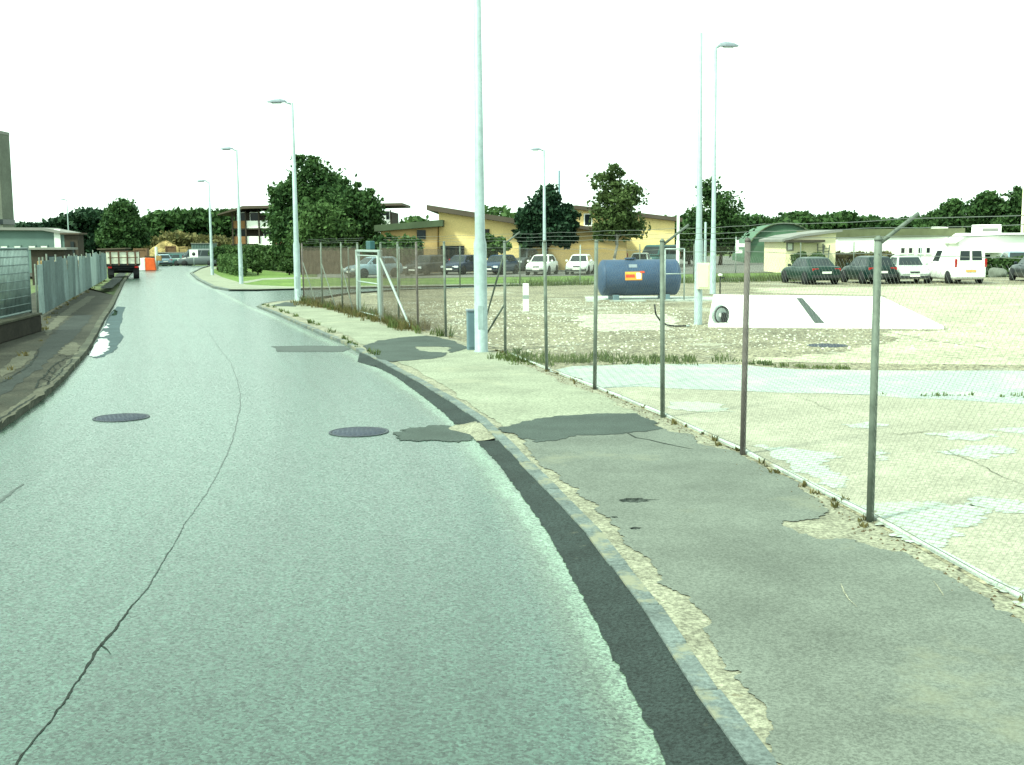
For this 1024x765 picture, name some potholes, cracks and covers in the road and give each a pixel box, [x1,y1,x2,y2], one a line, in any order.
manhole cover [328,427,389,437]
crack [0,484,23,503]
crack [15,324,241,765]
manhole cover [92,413,150,422]
